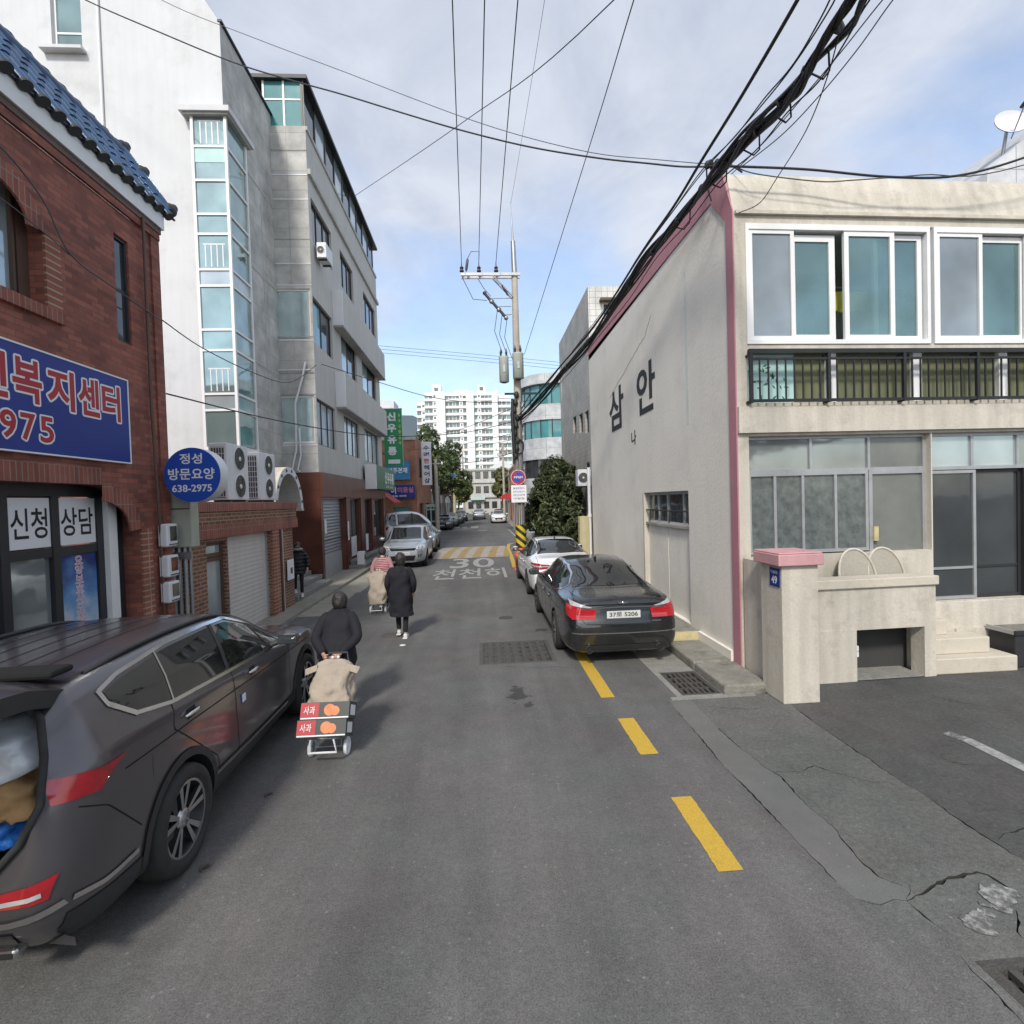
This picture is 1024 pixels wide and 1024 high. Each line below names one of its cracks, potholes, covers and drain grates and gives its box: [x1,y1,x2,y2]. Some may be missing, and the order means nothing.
drain grate [660,671,721,695]
crack [857,871,1022,934]
crack [718,709,1024,885]
drain grate [975,957,1024,1007]
